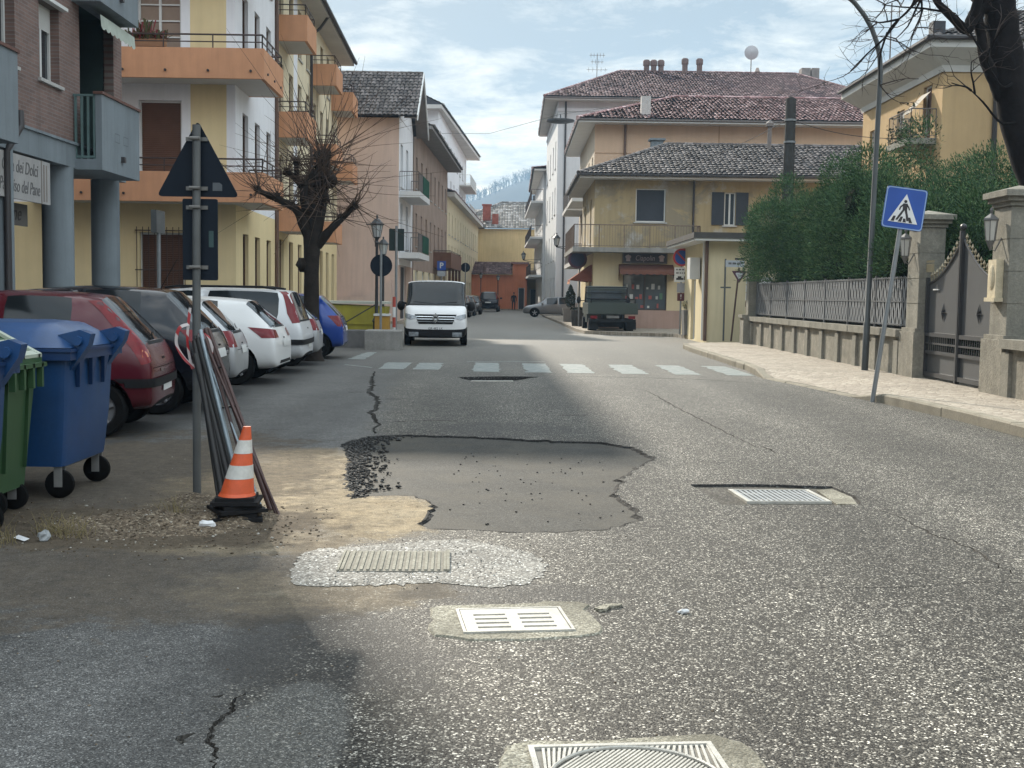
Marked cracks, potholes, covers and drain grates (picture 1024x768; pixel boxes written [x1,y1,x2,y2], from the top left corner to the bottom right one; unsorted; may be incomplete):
crack [175,691,249,768]
crack [648,391,776,453]
drain grate [691,484,861,505]
drain grate [428,601,603,641]
crack [349,371,443,433]
pothole [340,434,656,533]
manhole cover [498,734,767,768]
